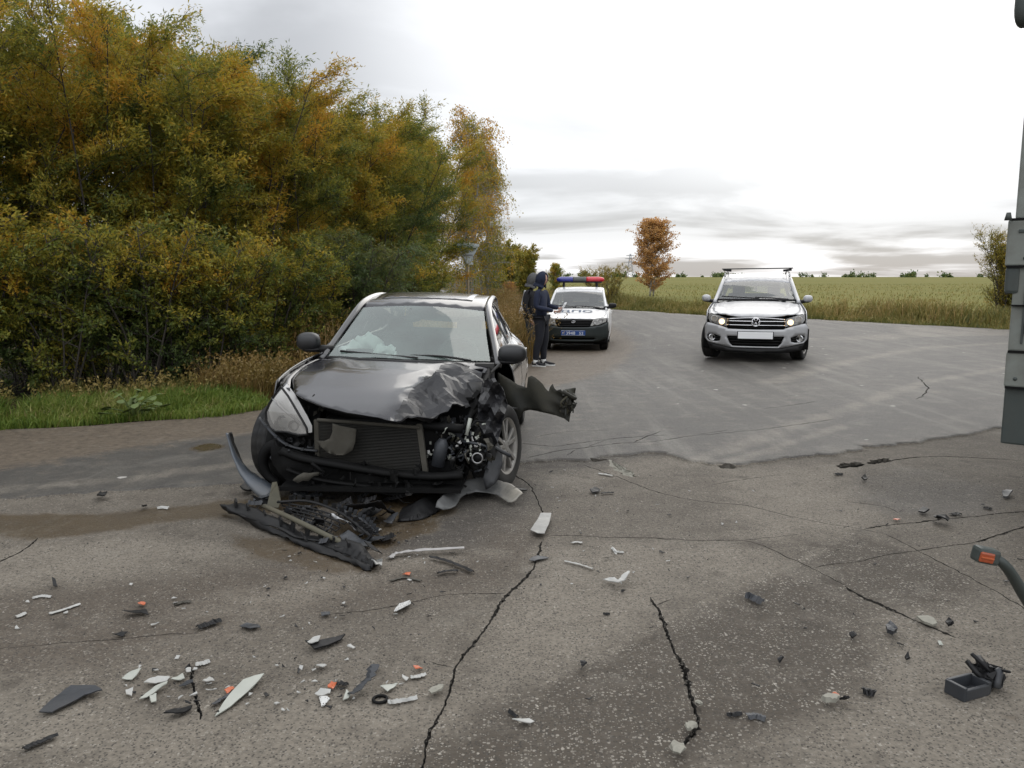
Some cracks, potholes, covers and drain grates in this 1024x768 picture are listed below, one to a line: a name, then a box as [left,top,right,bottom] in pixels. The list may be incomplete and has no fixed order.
crack [335,465,1024,768]
crack [0,633,176,649]
